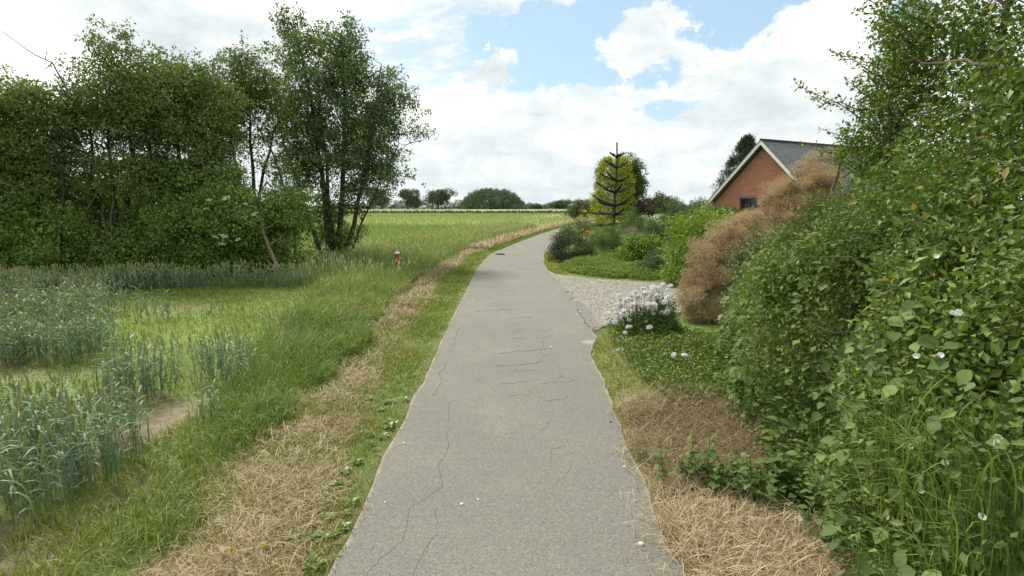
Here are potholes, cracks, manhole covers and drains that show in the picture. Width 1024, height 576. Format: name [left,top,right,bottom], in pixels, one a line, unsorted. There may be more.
crack [482,295,578,484]
crack [366,327,460,576]
